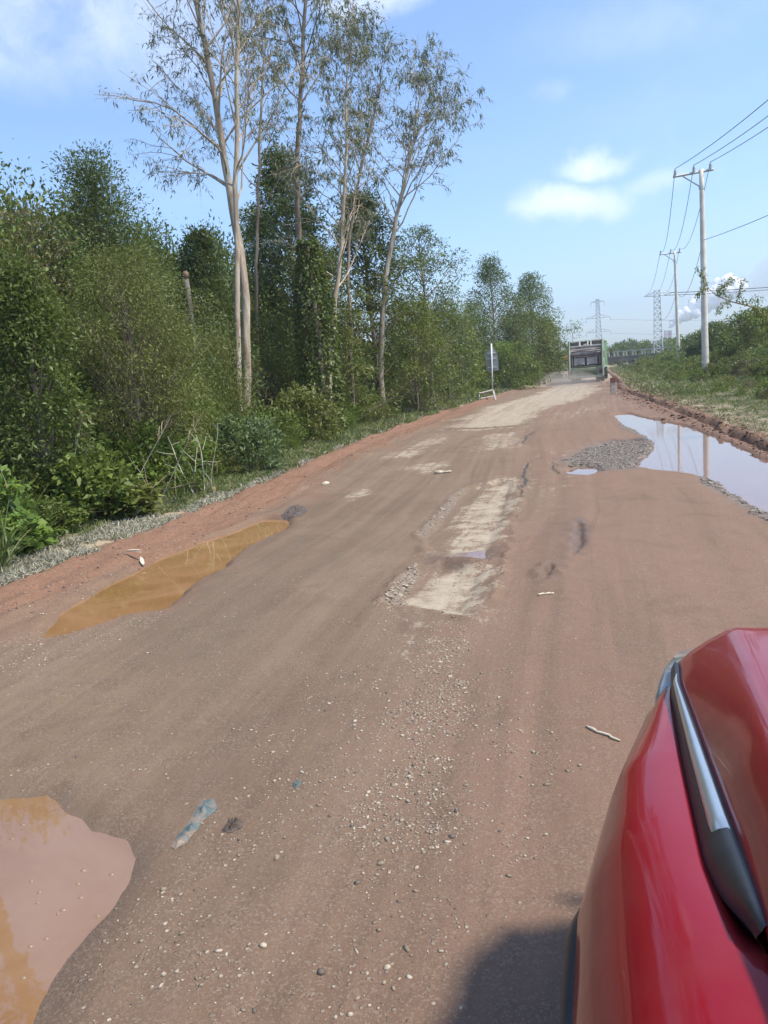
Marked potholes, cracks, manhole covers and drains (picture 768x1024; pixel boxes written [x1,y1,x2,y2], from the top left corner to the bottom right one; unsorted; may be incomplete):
pothole [27,514,298,639]
pothole [612,412,768,518]
pothole [567,520,590,557]
pothole [534,560,562,580]
pothole [0,766,183,1024]
pothole [558,463,606,475]
crack [517,462,561,496]
